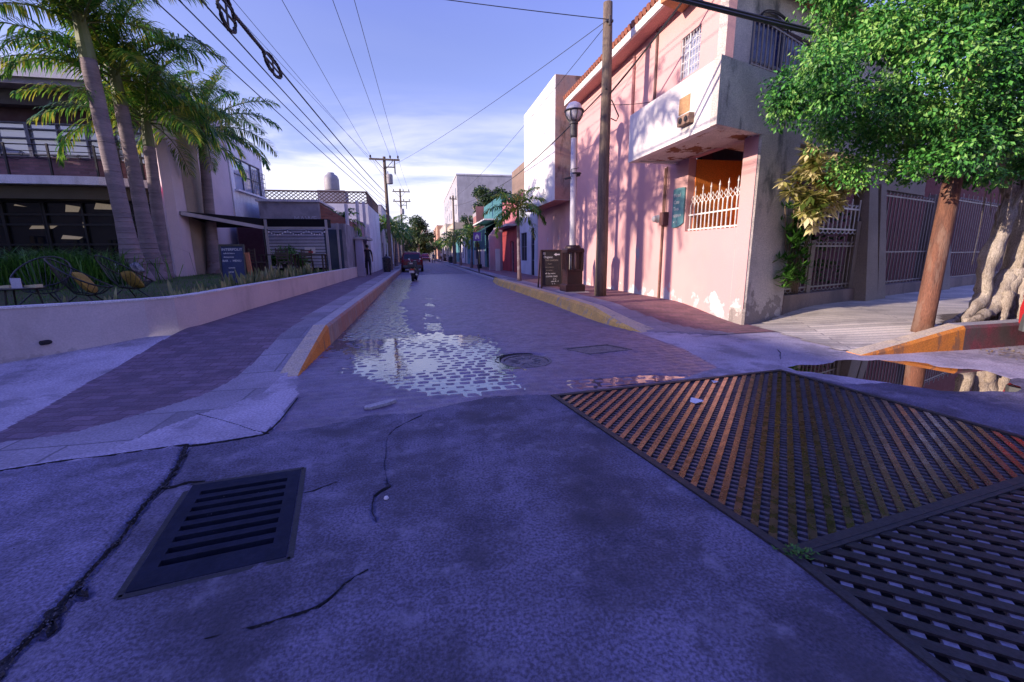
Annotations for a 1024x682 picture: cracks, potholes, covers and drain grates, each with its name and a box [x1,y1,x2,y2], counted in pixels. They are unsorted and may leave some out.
manhole cover [500,354,552,368]
manhole cover [563,344,632,355]
crack [0,397,336,678]
drain grate [114,467,306,600]
drain grate [551,369,1024,557]
drain grate [788,483,1024,682]
crack [204,569,368,639]
crack [372,415,422,520]
